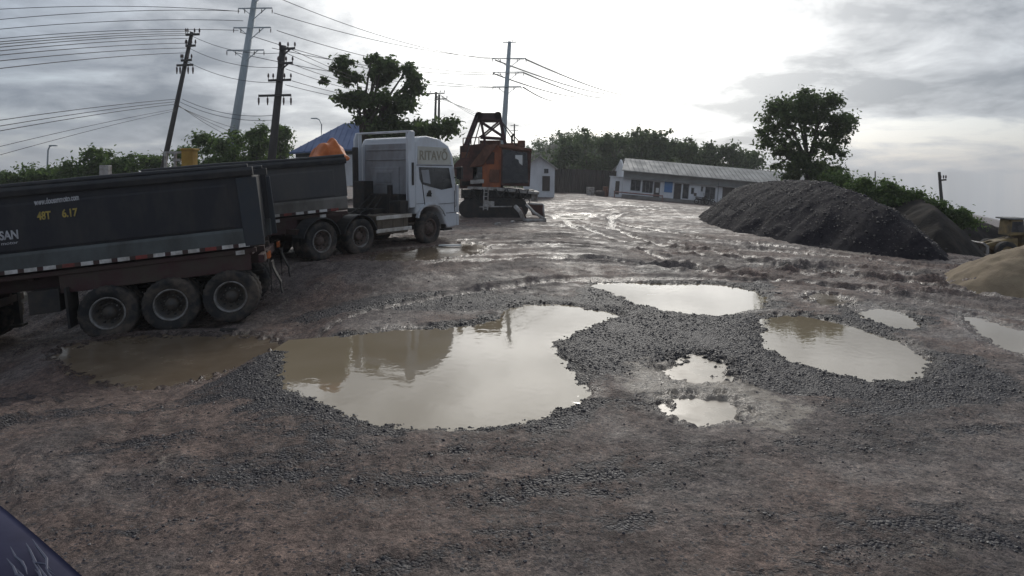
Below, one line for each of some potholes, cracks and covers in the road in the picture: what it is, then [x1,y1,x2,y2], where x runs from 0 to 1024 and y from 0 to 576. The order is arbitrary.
pothole [749,310,944,384]
pothole [266,300,626,435]
pothole [579,279,778,317]
pothole [653,392,750,429]
pothole [660,351,738,387]
pothole [42,329,288,392]
pothole [948,312,1024,356]
